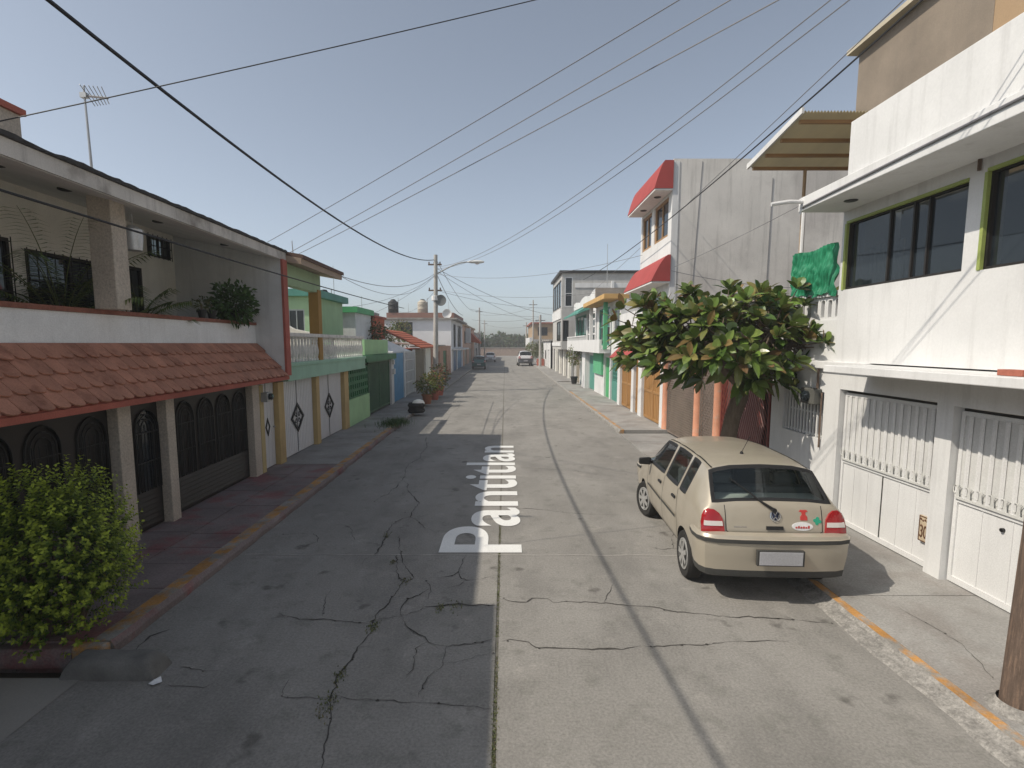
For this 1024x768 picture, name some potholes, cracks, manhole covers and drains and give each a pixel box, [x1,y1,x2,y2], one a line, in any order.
crack [505,590,833,624]
crack [281,437,495,768]
crack [507,639,774,650]
